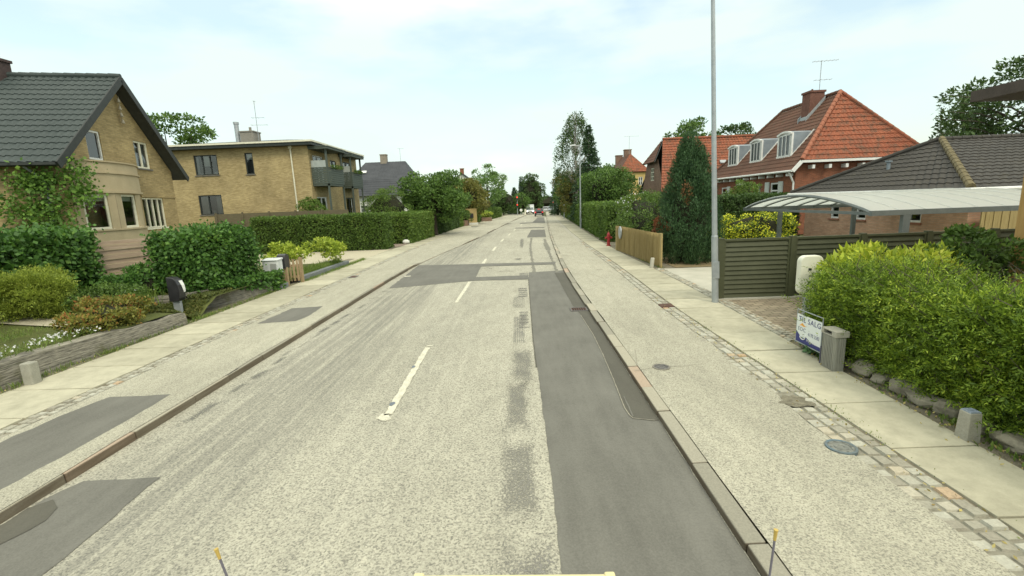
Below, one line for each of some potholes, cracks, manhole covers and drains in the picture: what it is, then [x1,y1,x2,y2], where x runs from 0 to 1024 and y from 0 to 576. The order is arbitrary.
manhole cover [824,439,859,456]
